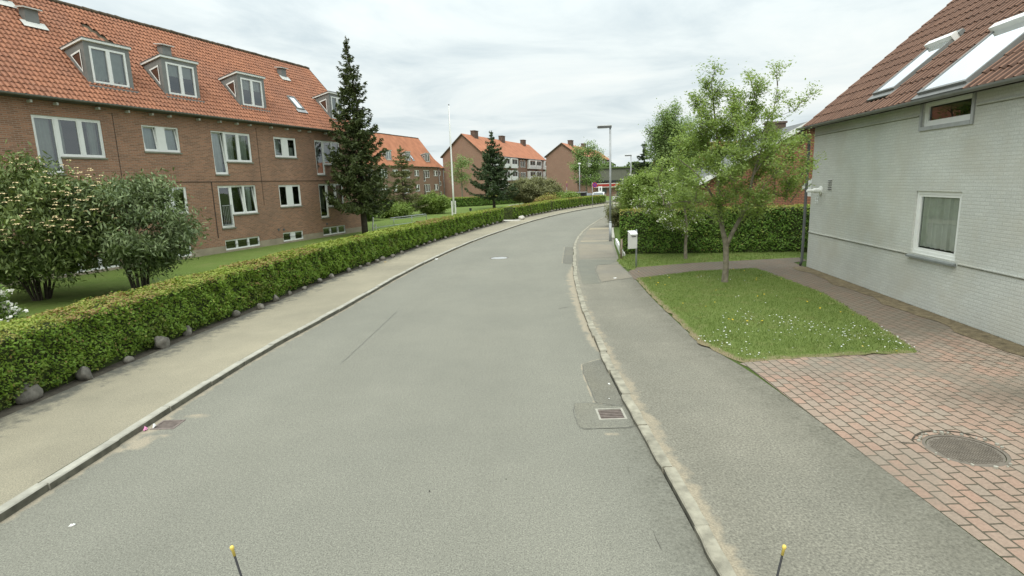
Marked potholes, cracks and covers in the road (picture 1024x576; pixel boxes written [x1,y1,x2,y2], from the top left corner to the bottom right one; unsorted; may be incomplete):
drain grate [595,408,627,420]
manhole cover [922,434,1012,467]
